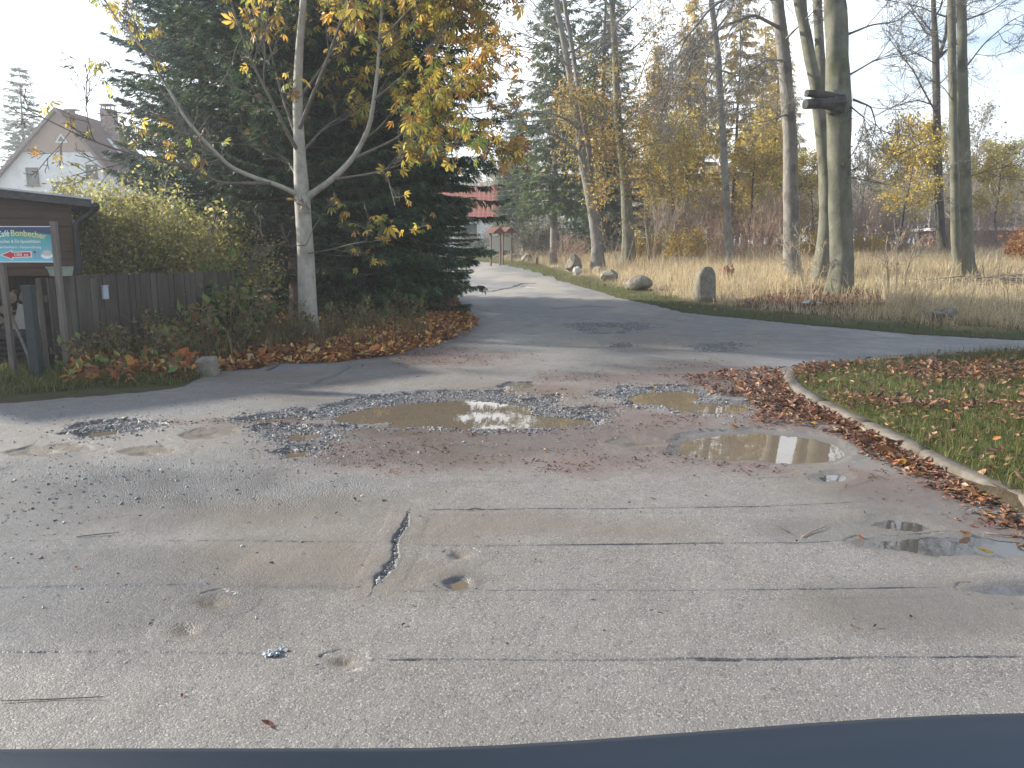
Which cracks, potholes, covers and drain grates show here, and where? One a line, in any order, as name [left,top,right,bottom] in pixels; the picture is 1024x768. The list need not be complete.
pothole [583,383,780,417]
pothole [281,388,647,436]
pothole [830,525,1024,569]
pothole [48,416,184,442]
pothole [216,409,338,425]
pothole [653,424,873,468]
crack [341,504,430,600]
pothole [254,441,342,462]
pothole [419,567,499,598]
pothole [106,441,206,460]
pothole [145,611,235,647]
